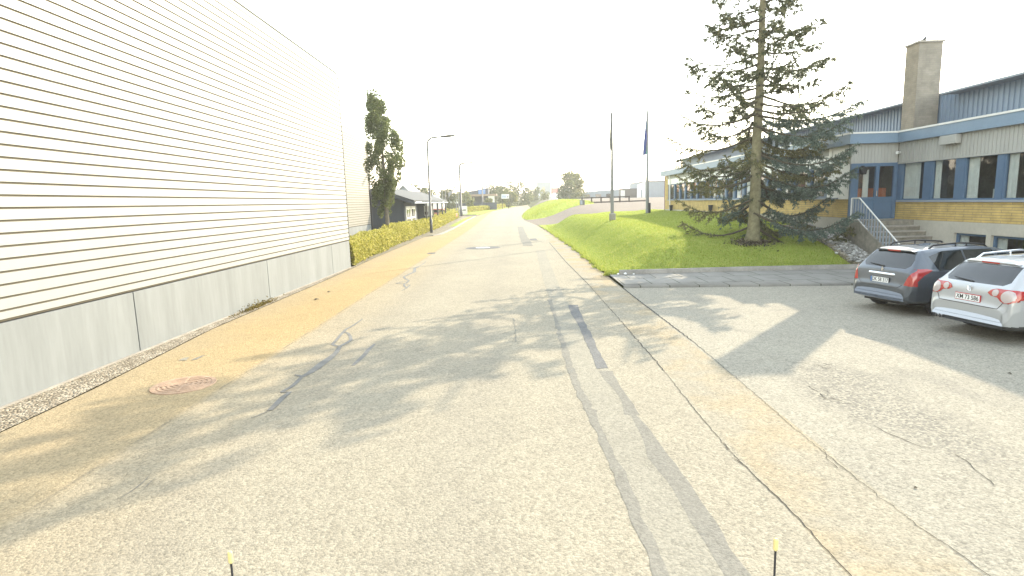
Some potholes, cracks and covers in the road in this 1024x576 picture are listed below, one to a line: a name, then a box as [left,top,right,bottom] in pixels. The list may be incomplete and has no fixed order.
manhole cover [149,376,217,395]
